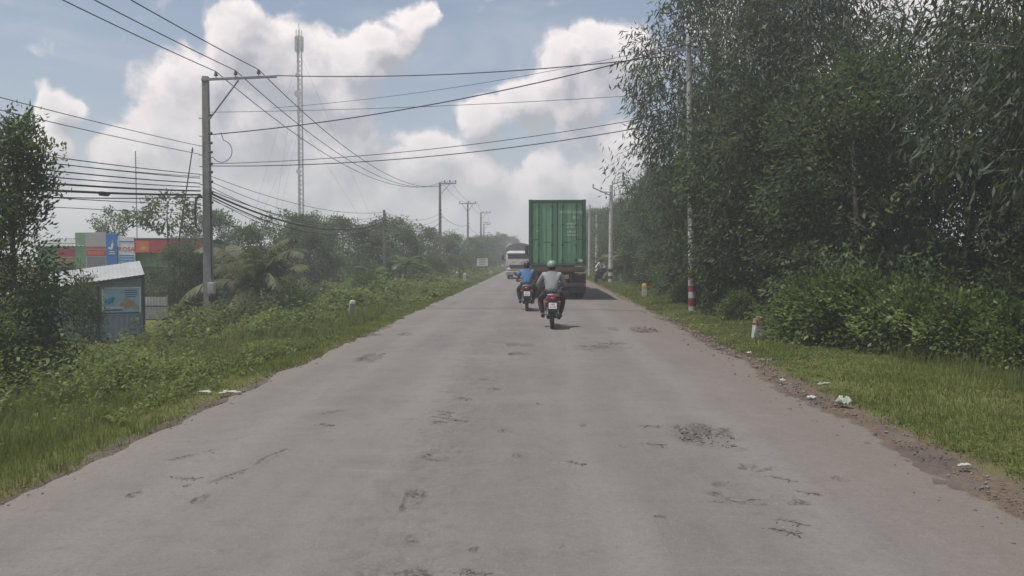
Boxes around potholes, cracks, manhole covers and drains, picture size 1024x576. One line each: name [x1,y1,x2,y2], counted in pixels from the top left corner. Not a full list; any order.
crack [754,516,817,540]
pothole [624,324,671,335]
crack [159,447,294,487]
crack [764,475,822,497]
pothole [346,350,397,366]
crack [310,409,349,428]
